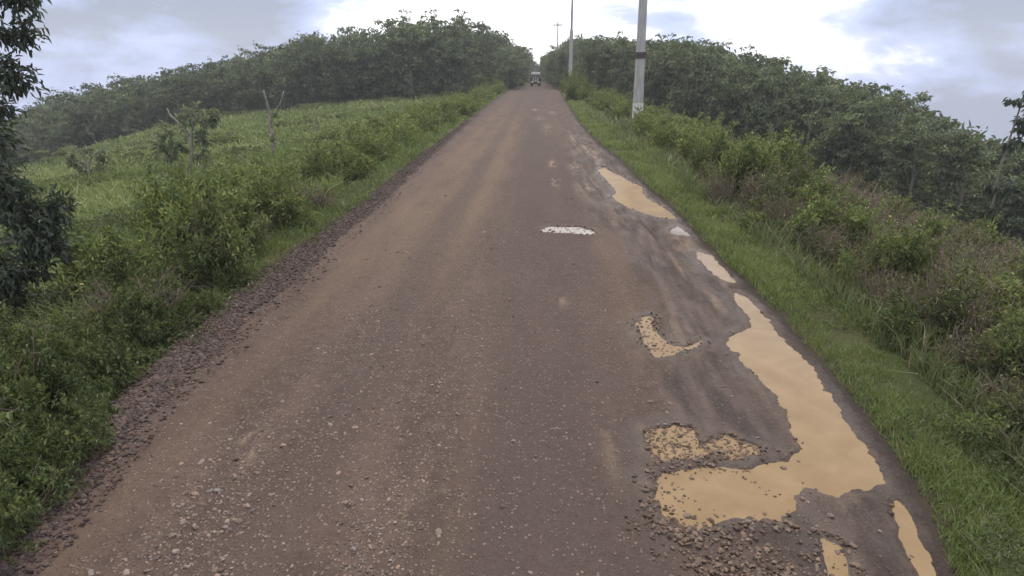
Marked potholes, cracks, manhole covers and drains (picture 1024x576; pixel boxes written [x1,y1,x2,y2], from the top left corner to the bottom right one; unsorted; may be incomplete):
pothole [886,495,946,576]
pothole [642,290,894,536]
pothole [596,167,678,219]
pothole [693,249,739,283]
pothole [817,534,855,576]
